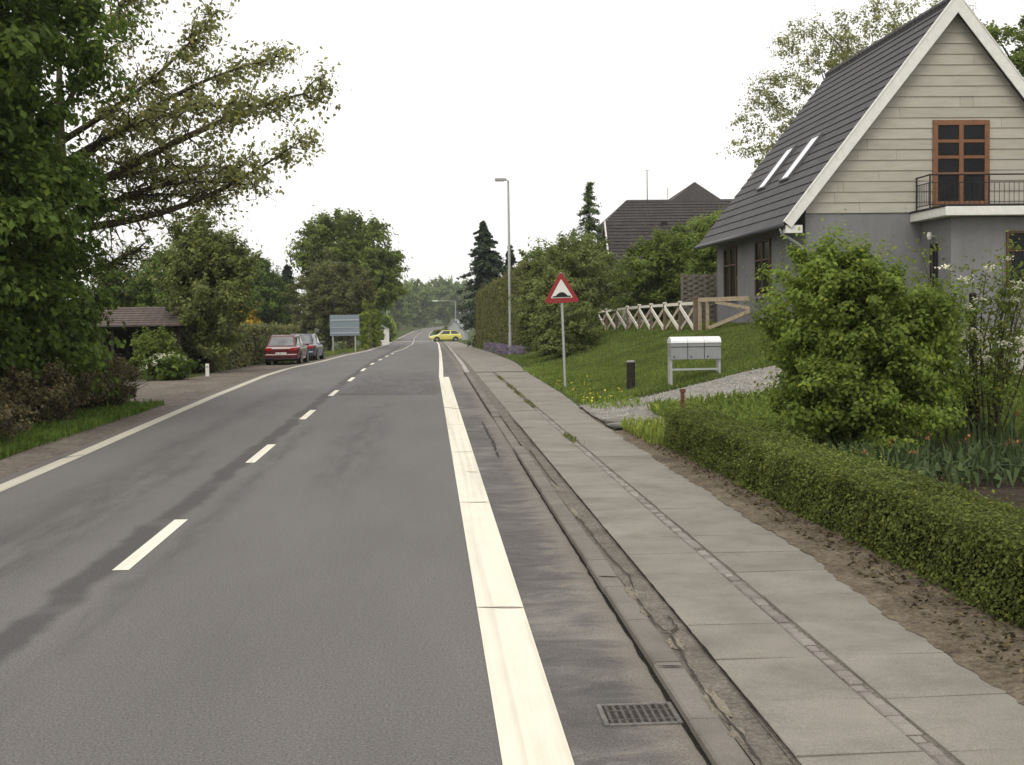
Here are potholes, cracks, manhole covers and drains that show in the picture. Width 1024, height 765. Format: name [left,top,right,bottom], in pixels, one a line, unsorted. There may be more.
crack [466,418,802,765]
drain grate [596,702,684,727]
